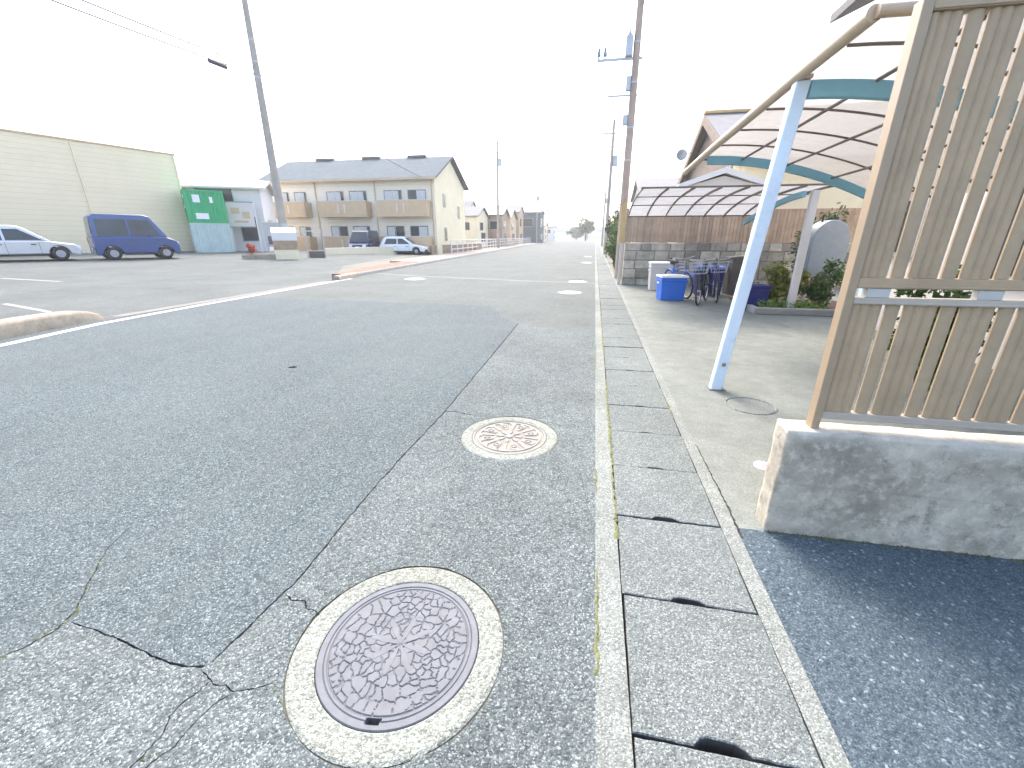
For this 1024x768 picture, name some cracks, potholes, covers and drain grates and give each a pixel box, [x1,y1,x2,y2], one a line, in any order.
manhole cover [460,416,558,461]
manhole cover [283,566,504,768]
crack [0,509,272,768]
